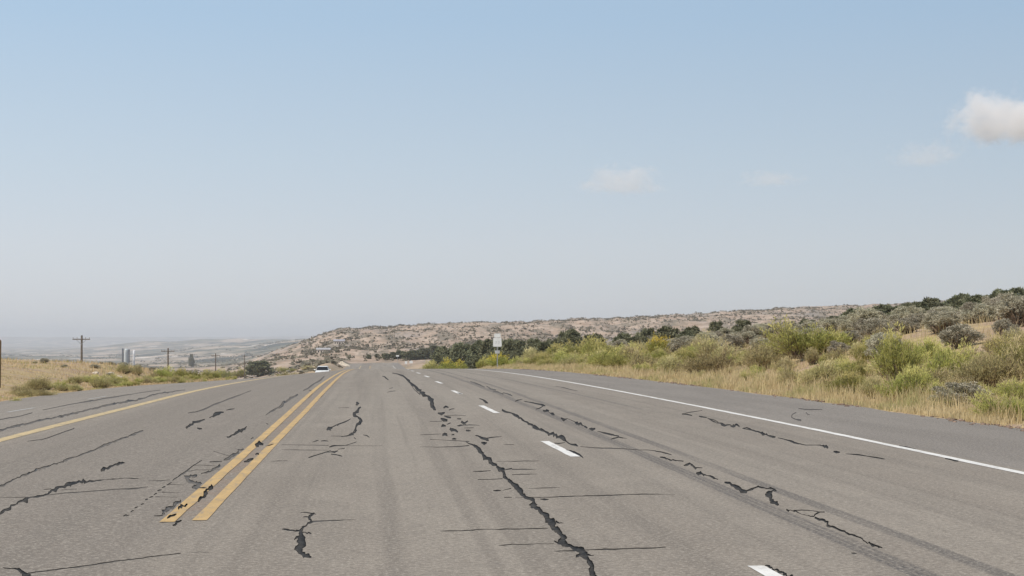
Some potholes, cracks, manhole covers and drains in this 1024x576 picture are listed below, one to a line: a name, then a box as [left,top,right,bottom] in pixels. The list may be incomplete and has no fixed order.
crack [282,512,341,558]
crack [382,373,883,576]
crack [3,552,206,576]
crack [287,402,370,461]
crack [0,377,324,526]
